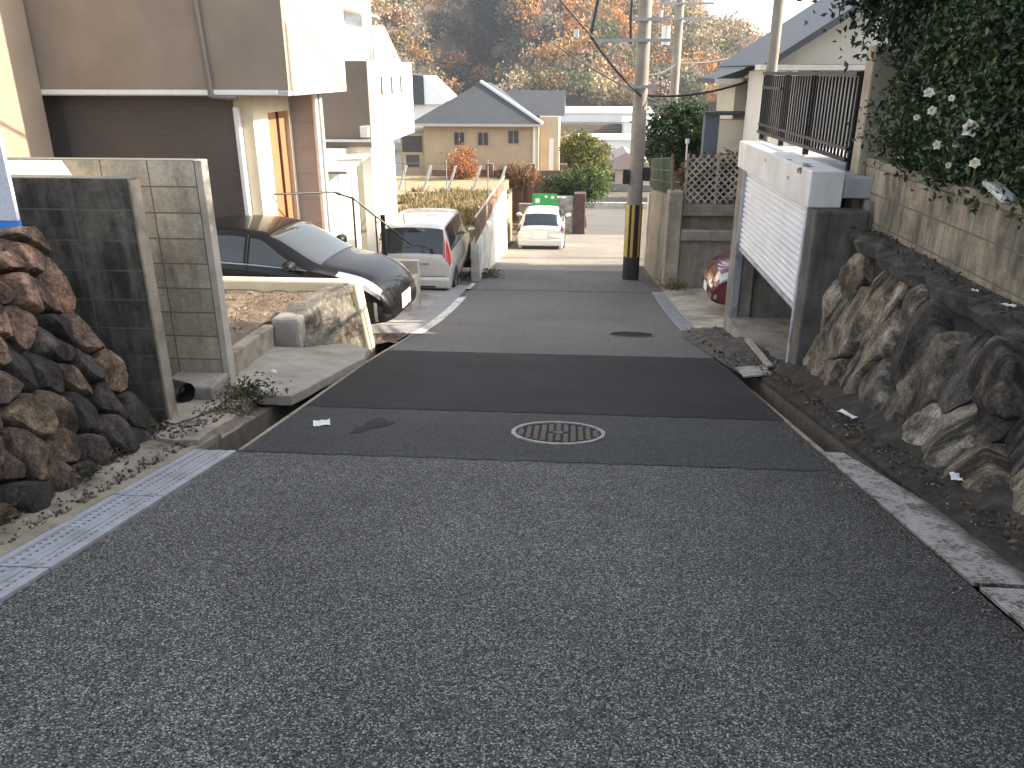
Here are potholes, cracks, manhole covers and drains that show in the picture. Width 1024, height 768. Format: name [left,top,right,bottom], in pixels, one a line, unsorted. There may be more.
drain grate [667,314,691,323]
drain grate [662,306,683,315]
drain grate [0,567,49,603]
manhole cover [511,421,605,445]
drain grate [115,449,236,499]
drain grate [656,299,676,308]
drain grate [674,323,696,331]
drain grate [0,494,163,572]
